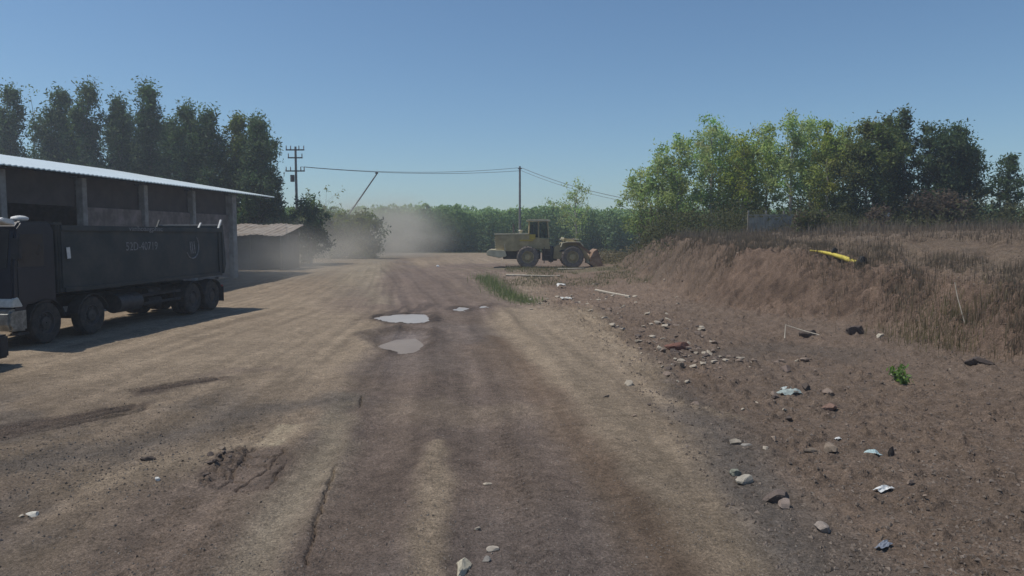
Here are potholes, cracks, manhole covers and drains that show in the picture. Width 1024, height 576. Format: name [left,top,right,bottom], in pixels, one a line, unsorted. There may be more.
pothole [362,312,437,324]
pothole [193,445,299,495]
pothole [359,324,441,354]
crack [299,466,340,568]
